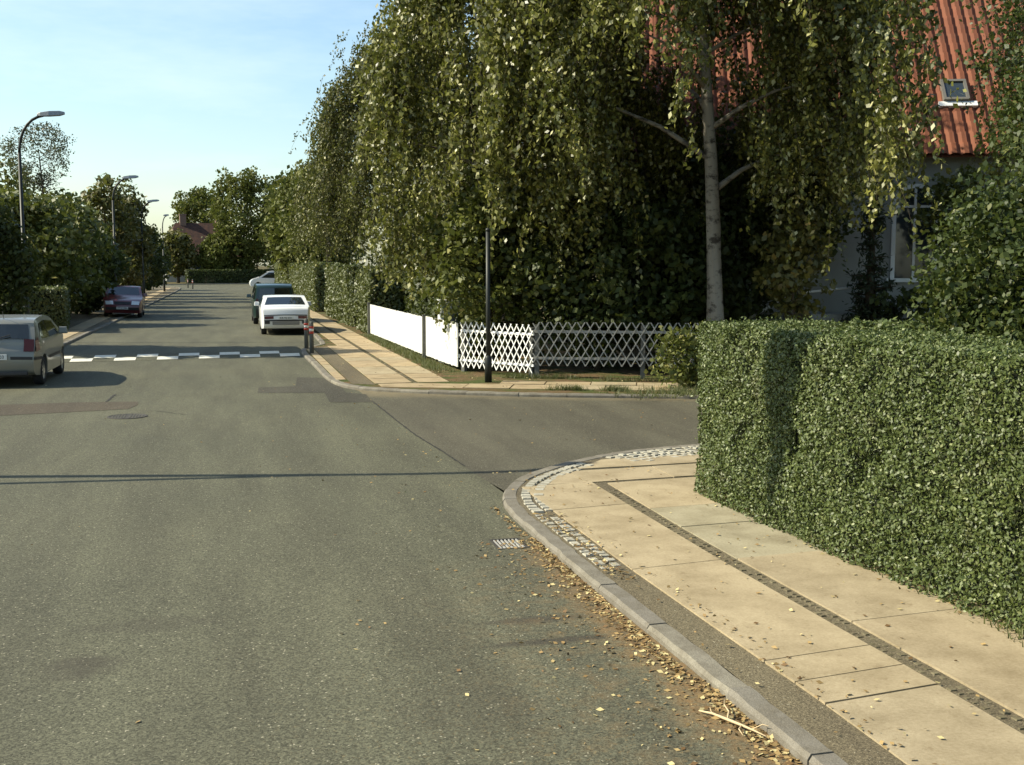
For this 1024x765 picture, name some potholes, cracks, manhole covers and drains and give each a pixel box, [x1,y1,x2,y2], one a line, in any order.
drain grate [489,538,530,550]
